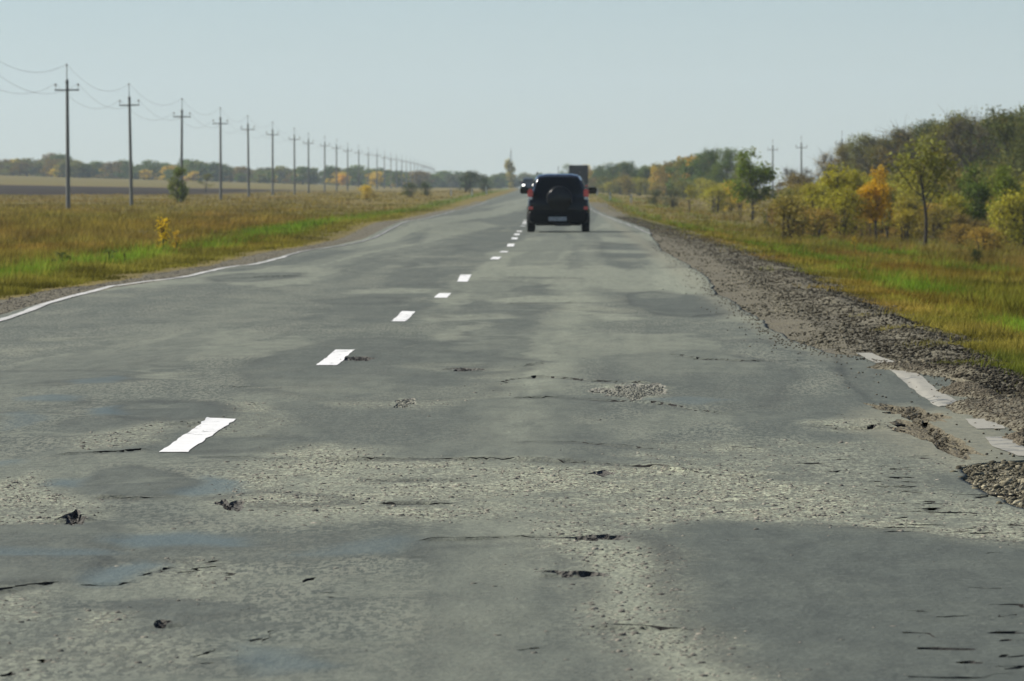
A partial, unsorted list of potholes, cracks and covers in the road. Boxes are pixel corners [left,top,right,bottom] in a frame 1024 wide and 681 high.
crack [0,582,56,590]
pothole [53,509,88,525]
pothole [393,398,416,408]
crack [199,441,780,478]
pothole [154,619,172,629]
pothole [888,419,986,460]
crack [502,363,710,412]
pothole [587,383,668,400]
pothole [536,570,611,578]
pothole [214,499,244,513]
pothole [864,403,952,424]
